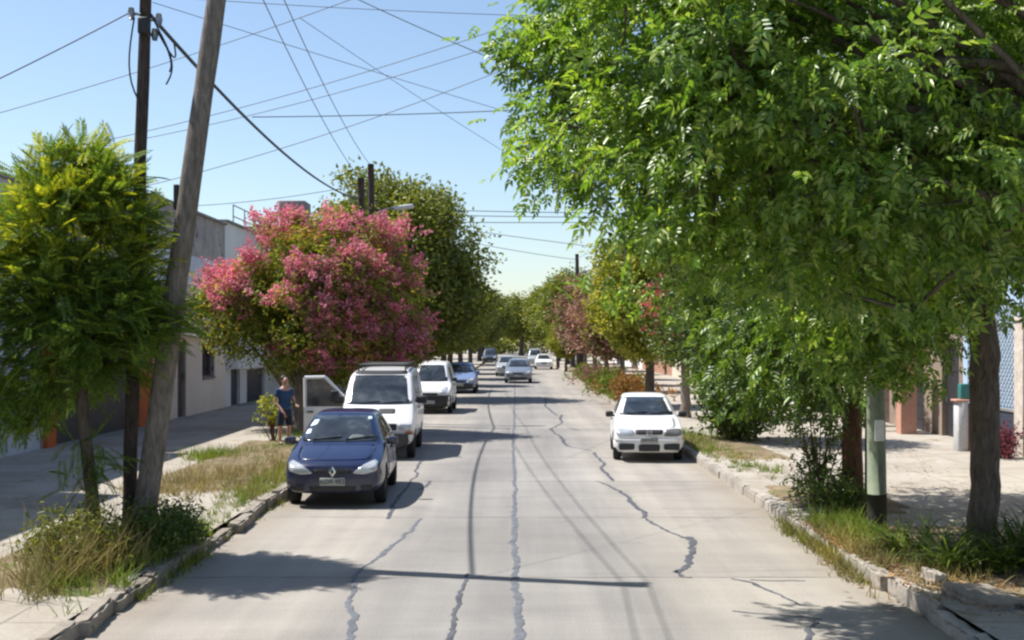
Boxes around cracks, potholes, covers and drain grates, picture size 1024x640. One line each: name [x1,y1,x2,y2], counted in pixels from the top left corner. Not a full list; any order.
crack [544,398,697,578]
crack [386,461,431,519]
crack [445,573,469,640]
crack [731,578,822,640]
